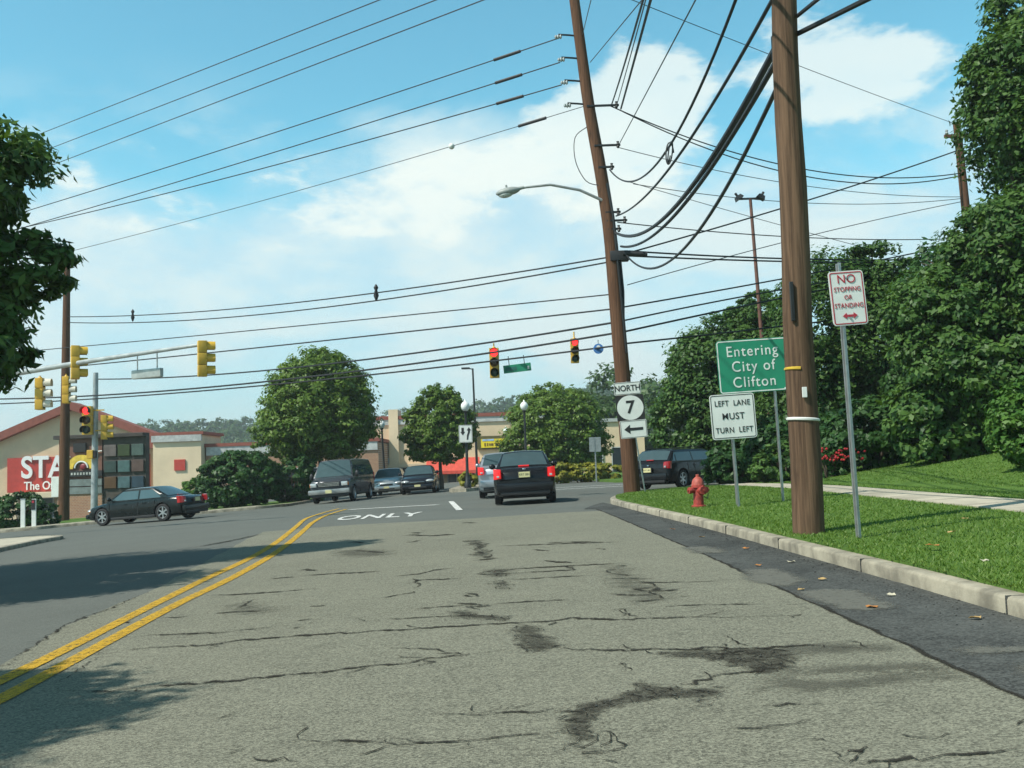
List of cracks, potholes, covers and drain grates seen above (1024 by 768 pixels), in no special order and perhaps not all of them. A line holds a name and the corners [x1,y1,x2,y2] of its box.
crack [66,541,800,692]
crack [227,725,653,762]
crack [565,636,865,684]
crack [432,703,591,715]
crack [736,702,1006,767]
crack [403,522,473,542]
